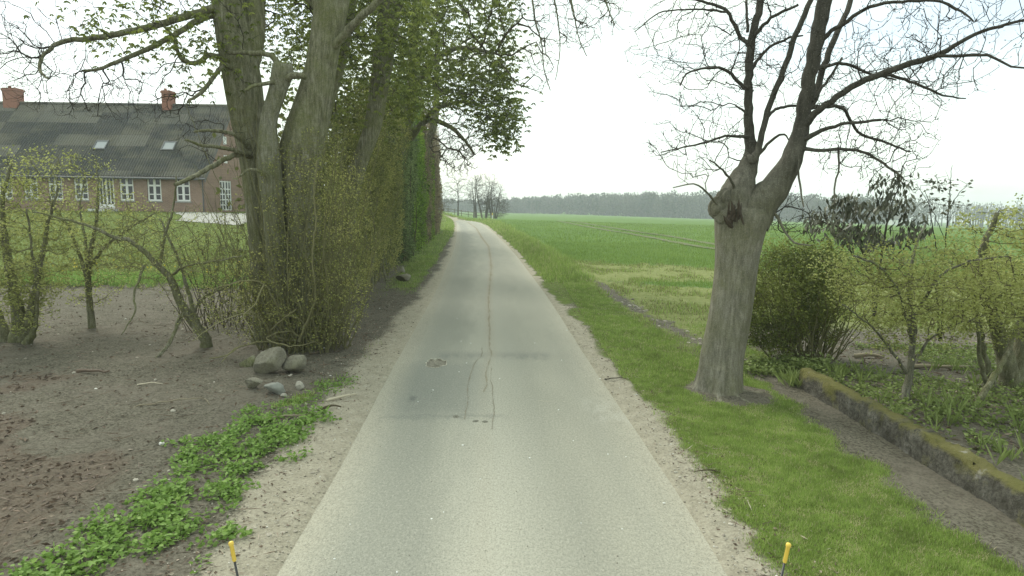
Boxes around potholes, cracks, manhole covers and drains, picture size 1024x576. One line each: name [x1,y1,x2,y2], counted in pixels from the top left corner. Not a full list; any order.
crack [464,348,495,429]
pothole [425,358,447,368]
